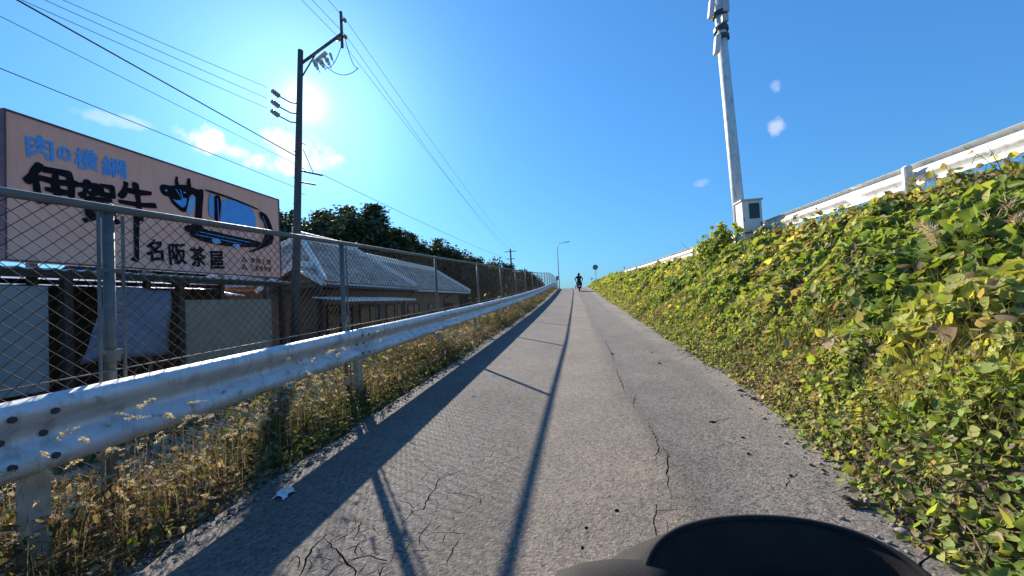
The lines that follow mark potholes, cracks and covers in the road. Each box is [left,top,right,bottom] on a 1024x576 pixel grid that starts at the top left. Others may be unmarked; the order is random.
crack [283,389,537,576]
crack [605,342,680,536]
